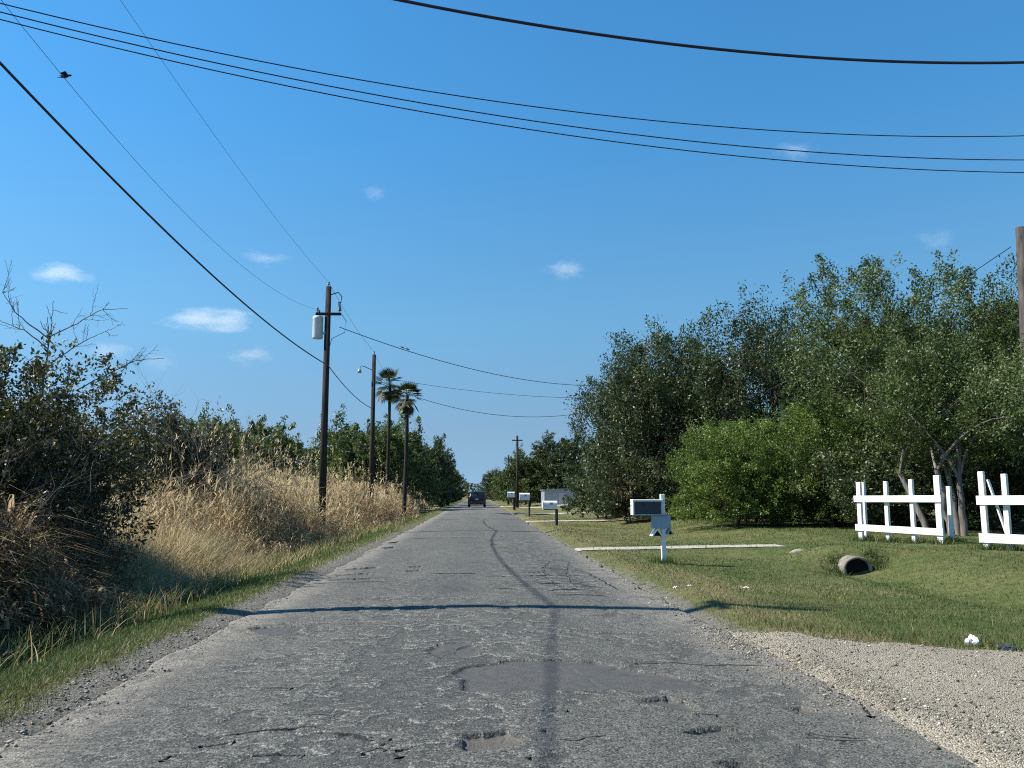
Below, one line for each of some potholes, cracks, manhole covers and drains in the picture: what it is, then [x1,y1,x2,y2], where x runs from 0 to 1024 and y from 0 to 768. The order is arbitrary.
crack [502,561,618,596]
pothole [447,728,534,754]
crack [198,713,414,760]
pothole [672,724,751,739]
pothole [625,695,709,713]
